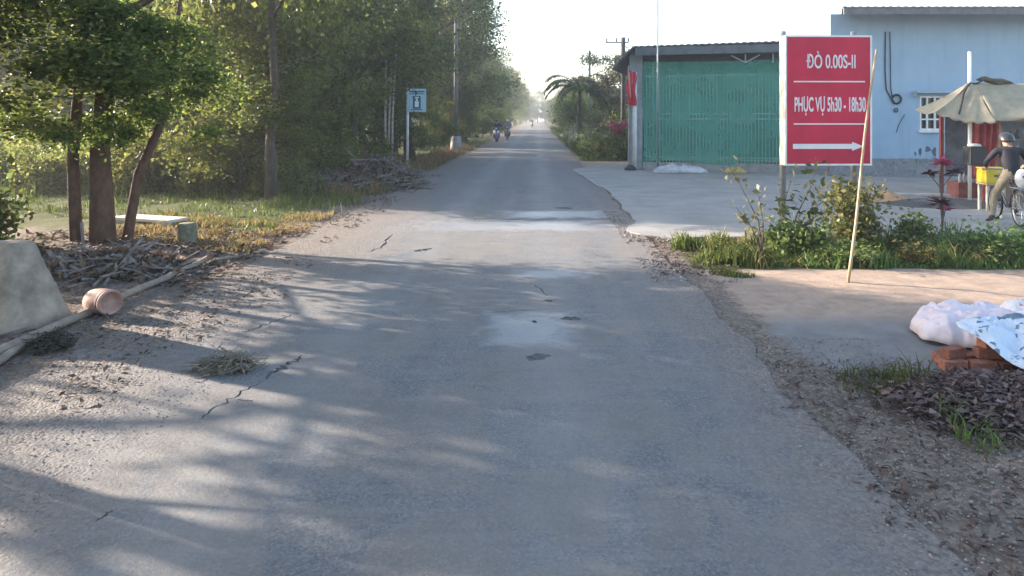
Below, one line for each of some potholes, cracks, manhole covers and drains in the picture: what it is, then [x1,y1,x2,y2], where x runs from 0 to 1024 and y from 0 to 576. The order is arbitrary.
pothole [526,353,551,361]
crack [197,355,302,421]
